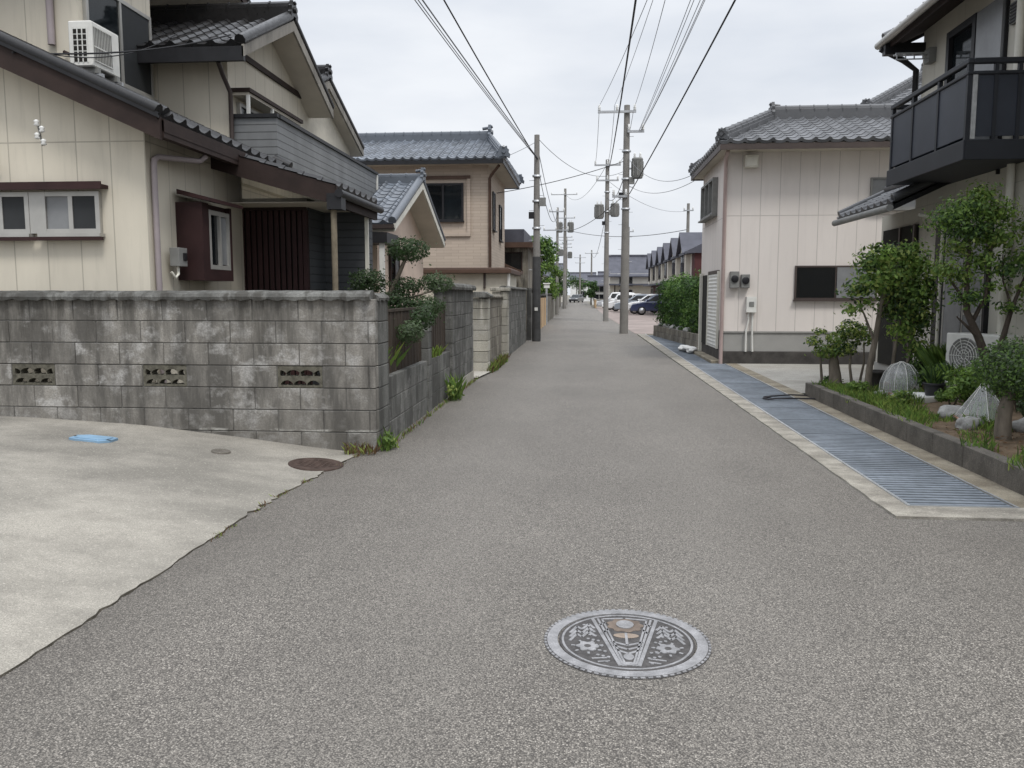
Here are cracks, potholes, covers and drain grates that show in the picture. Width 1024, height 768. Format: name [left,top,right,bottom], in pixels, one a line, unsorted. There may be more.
drain grate [733,390,792,398]
drain grate [778,419,865,434]
drain grate [800,433,903,453]
manhole cover [288,458,344,472]
drain grate [828,451,950,476]
drain grate [746,398,813,408]
drain grate [865,475,1012,507]
manhole cover [544,609,712,680]
drain grate [761,408,837,420]
